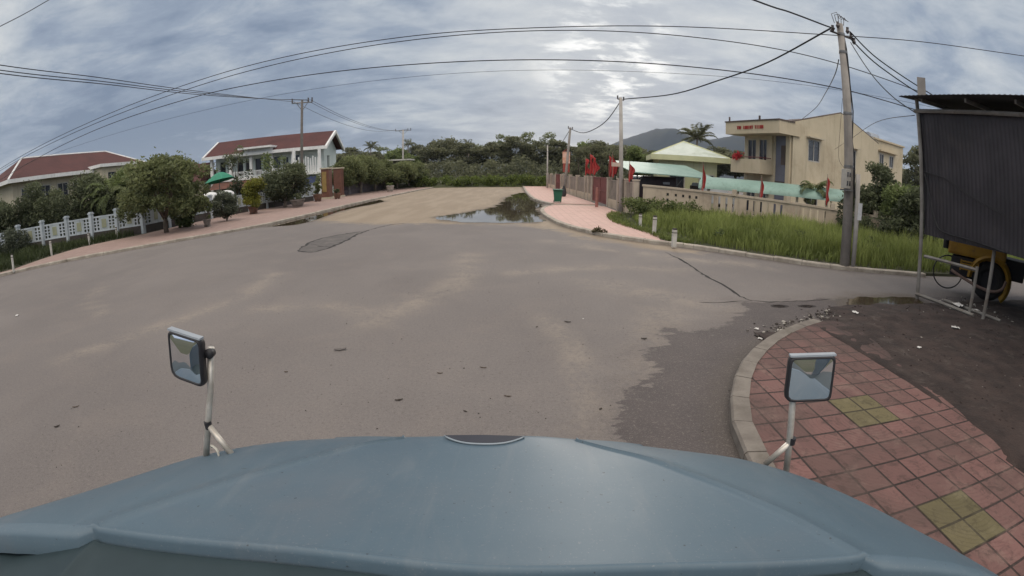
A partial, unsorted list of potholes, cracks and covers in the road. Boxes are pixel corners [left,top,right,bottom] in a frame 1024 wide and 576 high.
crack [668,253,825,303]
